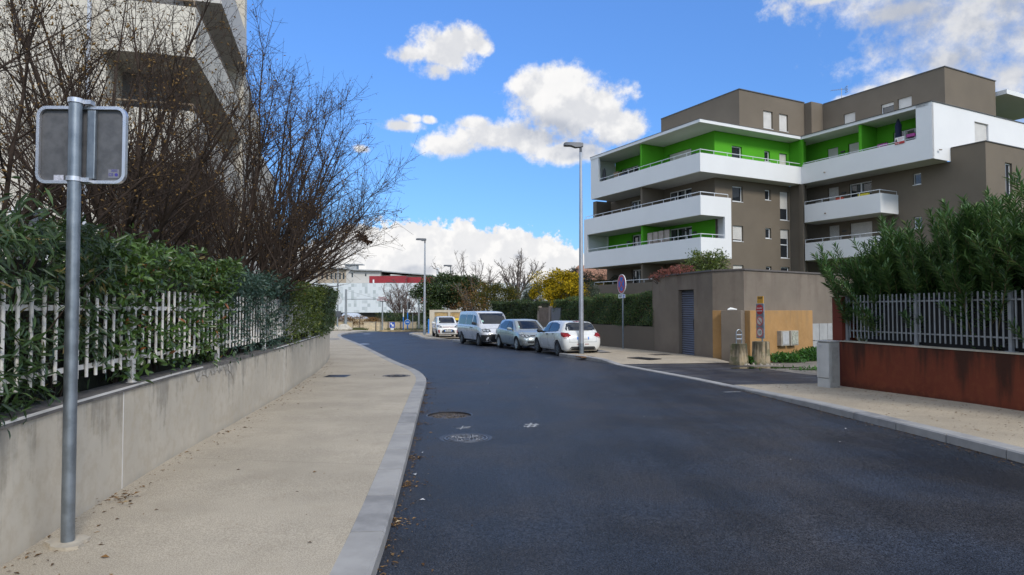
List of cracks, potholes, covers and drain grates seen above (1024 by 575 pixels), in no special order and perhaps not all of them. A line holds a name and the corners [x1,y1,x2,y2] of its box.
manhole cover [439,433,492,443]
manhole cover [426,411,473,419]
